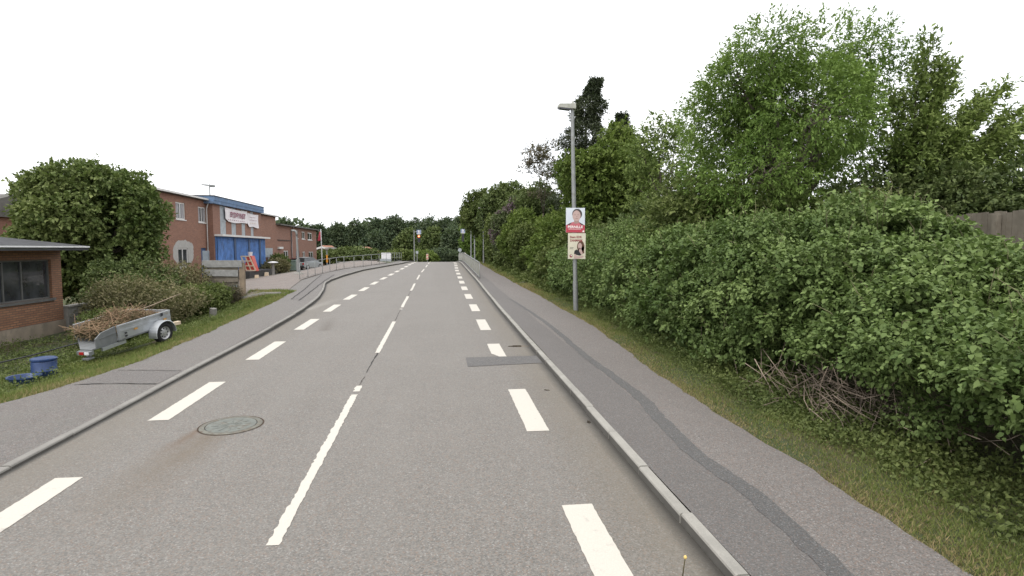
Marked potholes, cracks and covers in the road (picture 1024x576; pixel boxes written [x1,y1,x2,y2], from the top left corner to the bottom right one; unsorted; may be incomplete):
manhole cover [197,416,264,435]
